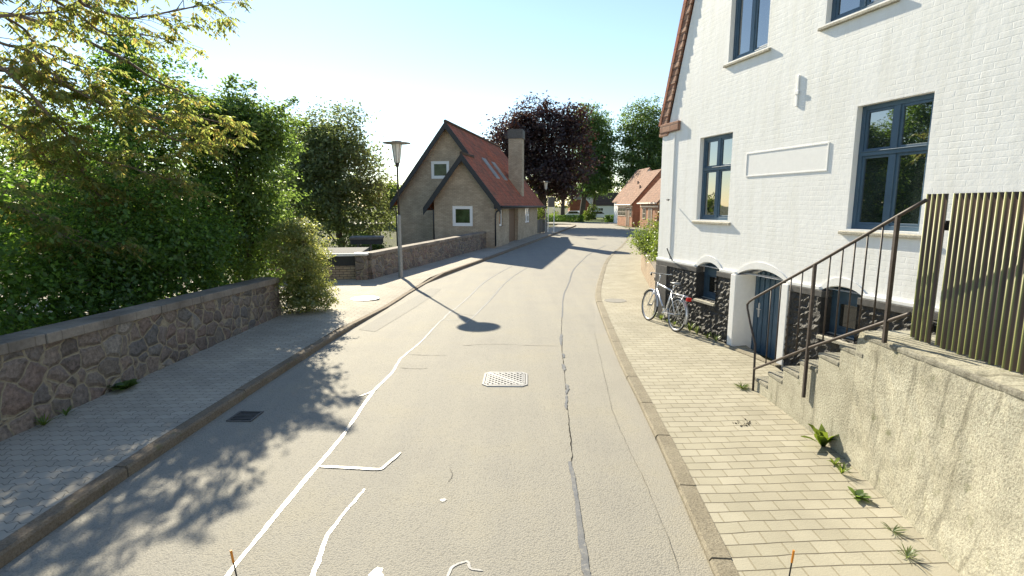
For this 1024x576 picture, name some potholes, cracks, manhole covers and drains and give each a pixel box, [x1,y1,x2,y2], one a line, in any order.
manhole cover [482,372,528,387]
crack [596,340,680,573]
drain grate [226,411,264,422]
